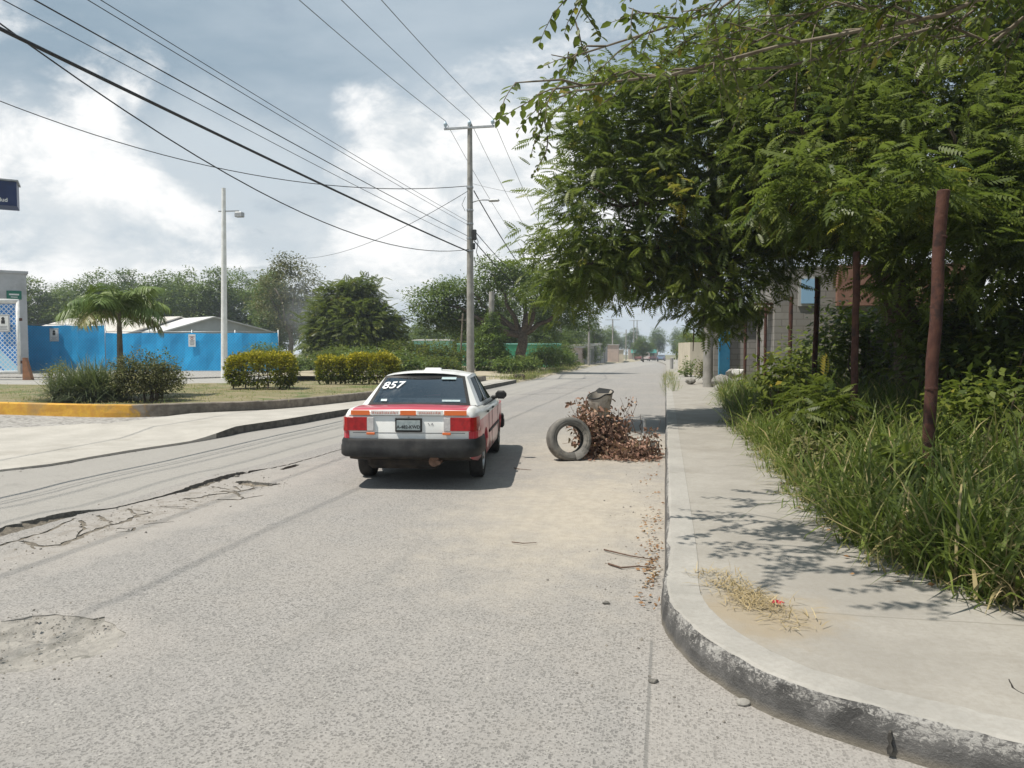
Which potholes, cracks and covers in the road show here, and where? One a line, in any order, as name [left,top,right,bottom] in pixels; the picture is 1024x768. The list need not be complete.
pothole [0,614,126,674]
crack [0,449,341,549]
